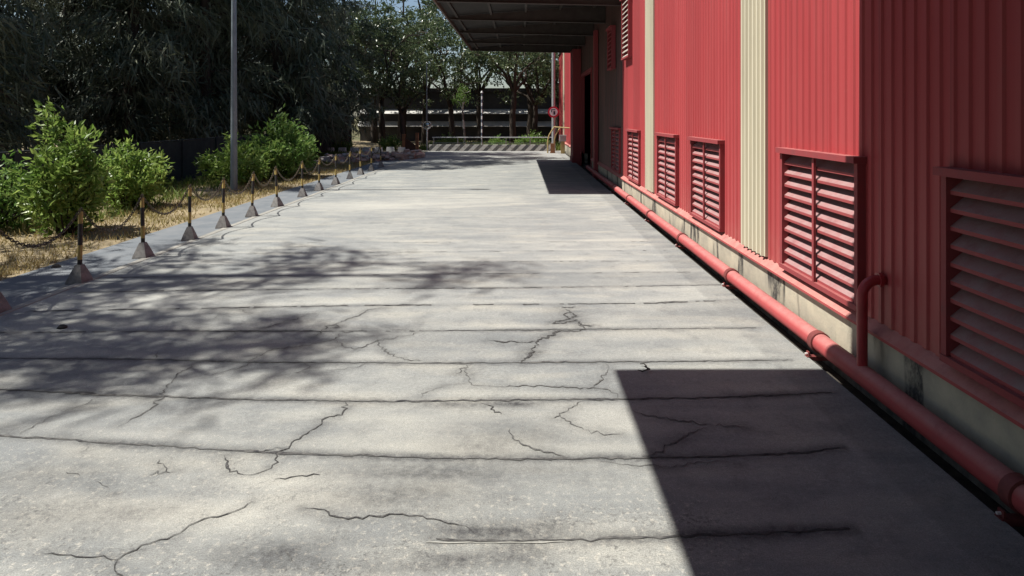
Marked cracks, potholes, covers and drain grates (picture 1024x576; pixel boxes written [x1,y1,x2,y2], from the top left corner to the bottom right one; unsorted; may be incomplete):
crack [421,364,747,467]
crack [305,507,480,534]
crack [212,308,416,375]
crack [493,307,590,362]
crack [224,402,348,479]
crack [44,502,250,576]
